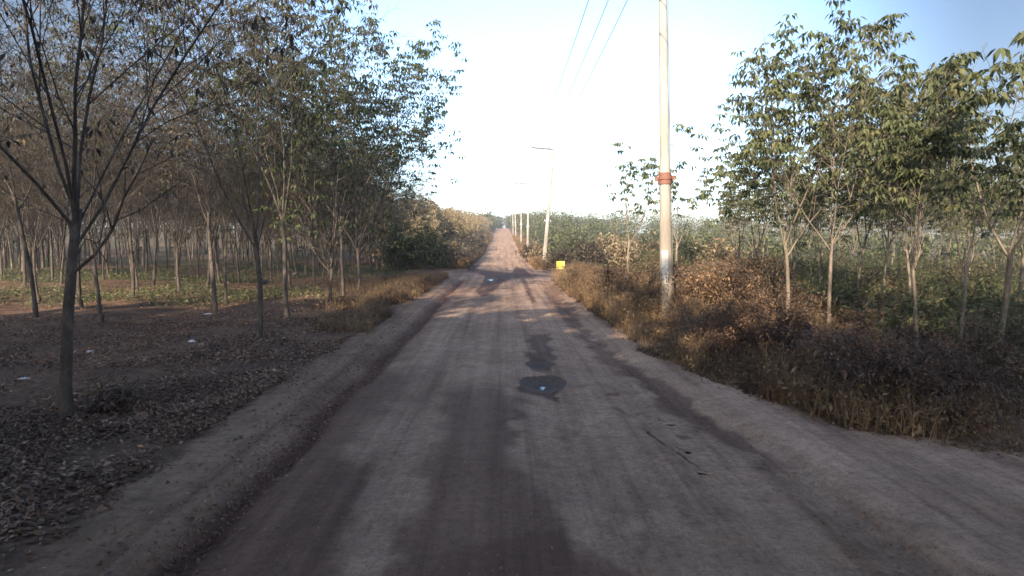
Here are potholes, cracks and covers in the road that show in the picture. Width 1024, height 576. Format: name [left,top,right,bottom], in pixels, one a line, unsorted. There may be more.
crack [629,413,709,474]
pothole [515,373,572,395]
pothole [523,359,555,371]
